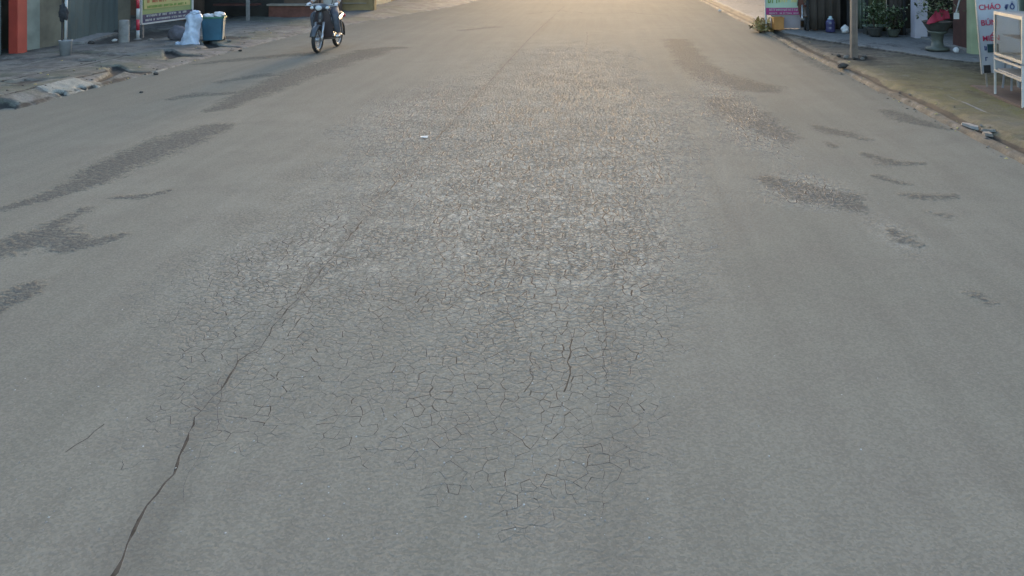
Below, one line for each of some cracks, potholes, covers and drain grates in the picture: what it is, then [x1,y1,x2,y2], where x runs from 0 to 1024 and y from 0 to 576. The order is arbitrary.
crack [66,7,722,576]
